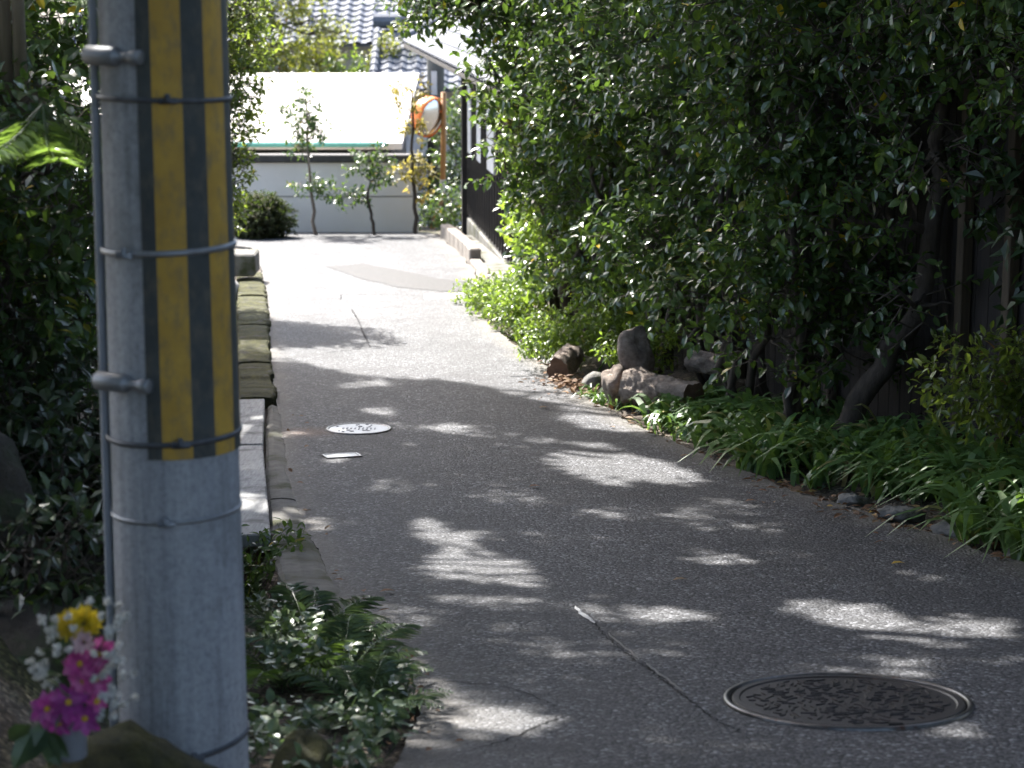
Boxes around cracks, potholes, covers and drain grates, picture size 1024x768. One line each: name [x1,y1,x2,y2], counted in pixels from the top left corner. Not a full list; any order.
crack [428,681,565,749]
manhole cover [326,423,392,435]
crack [327,294,387,353]
manhole cover [723,672,974,731]
